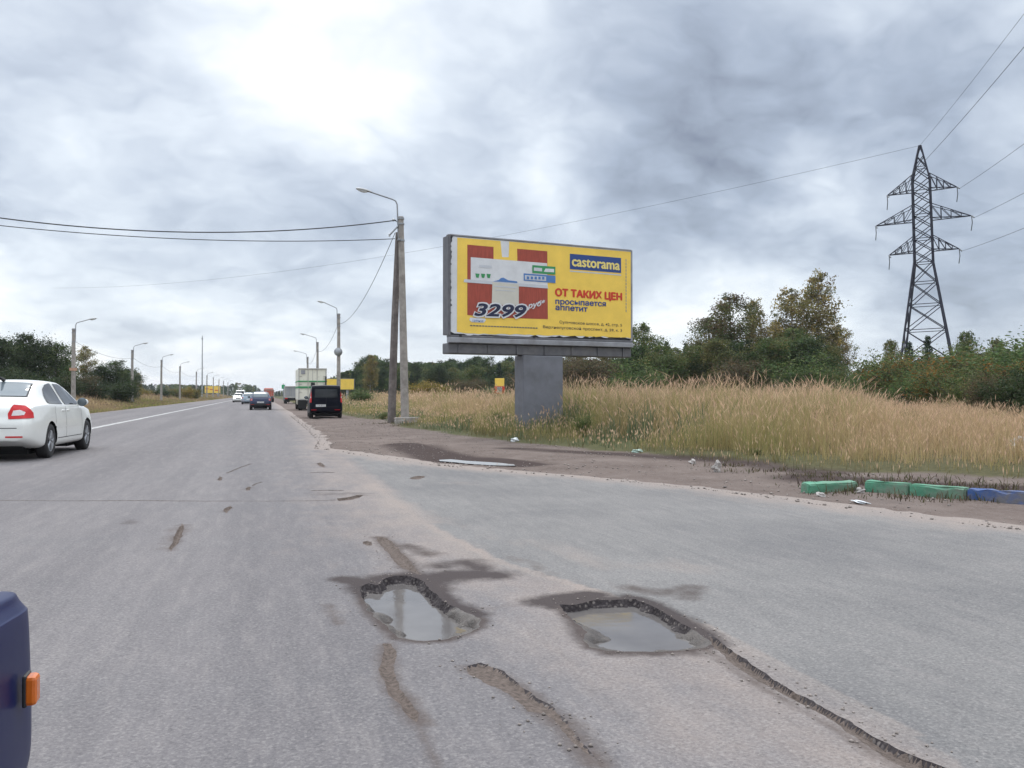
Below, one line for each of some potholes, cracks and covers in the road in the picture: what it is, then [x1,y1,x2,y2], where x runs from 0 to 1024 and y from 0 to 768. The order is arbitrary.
pothole [359,575,481,641]
pothole [559,599,712,652]
